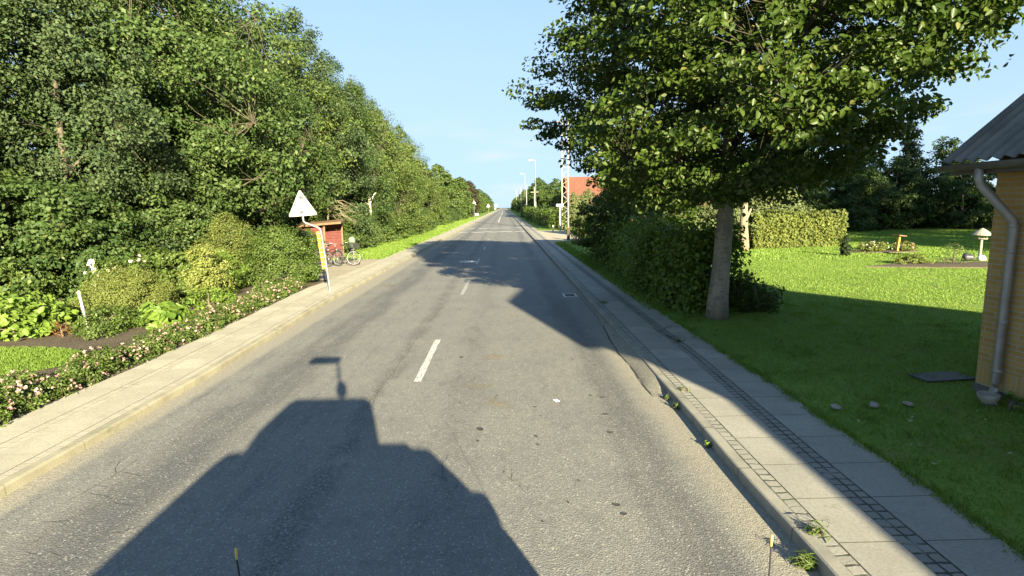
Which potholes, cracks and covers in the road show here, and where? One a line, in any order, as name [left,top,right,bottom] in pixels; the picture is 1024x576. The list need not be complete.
crack [20,460,169,574]
crack [602,325,651,394]
